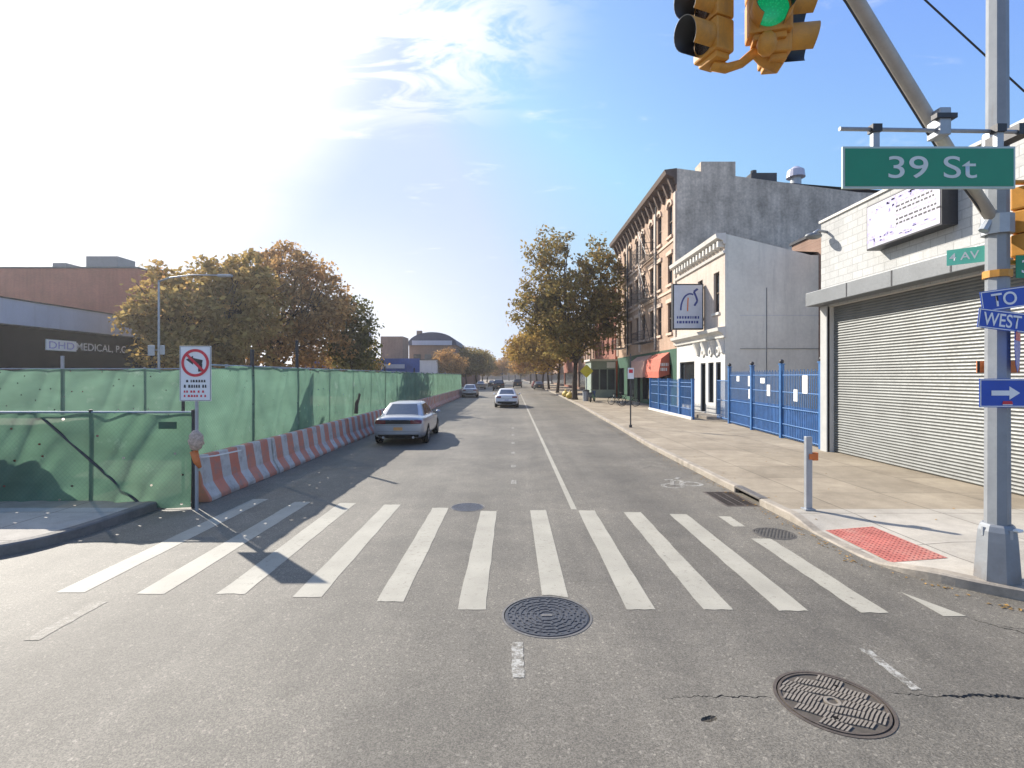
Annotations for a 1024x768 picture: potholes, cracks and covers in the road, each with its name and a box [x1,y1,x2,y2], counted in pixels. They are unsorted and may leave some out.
drain grate [704,485,767,507]
manhole cover [450,503,485,512]
manhole cover [502,596,592,639]
manhole cover [752,527,797,540]
manhole cover [773,671,899,739]
